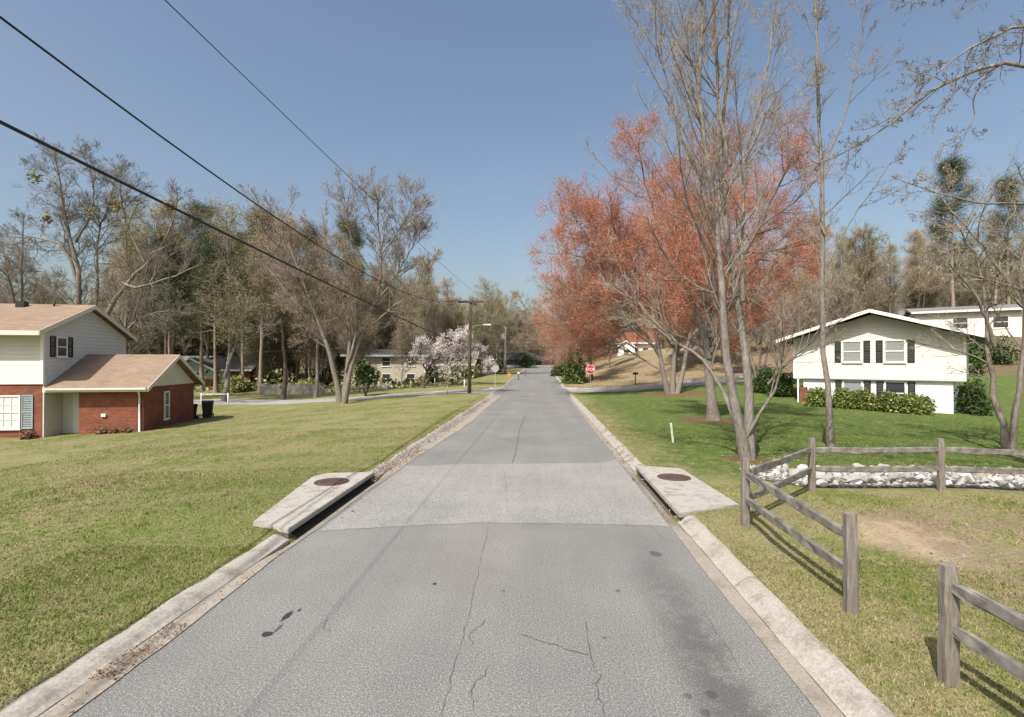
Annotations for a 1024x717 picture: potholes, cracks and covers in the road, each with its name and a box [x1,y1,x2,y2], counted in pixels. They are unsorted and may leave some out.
manhole cover [314,478,349,486]
crack [520,624,605,717]
drain grate [253,472,374,538]
manhole cover [657,473,691,481]
drain grate [636,465,739,521]
